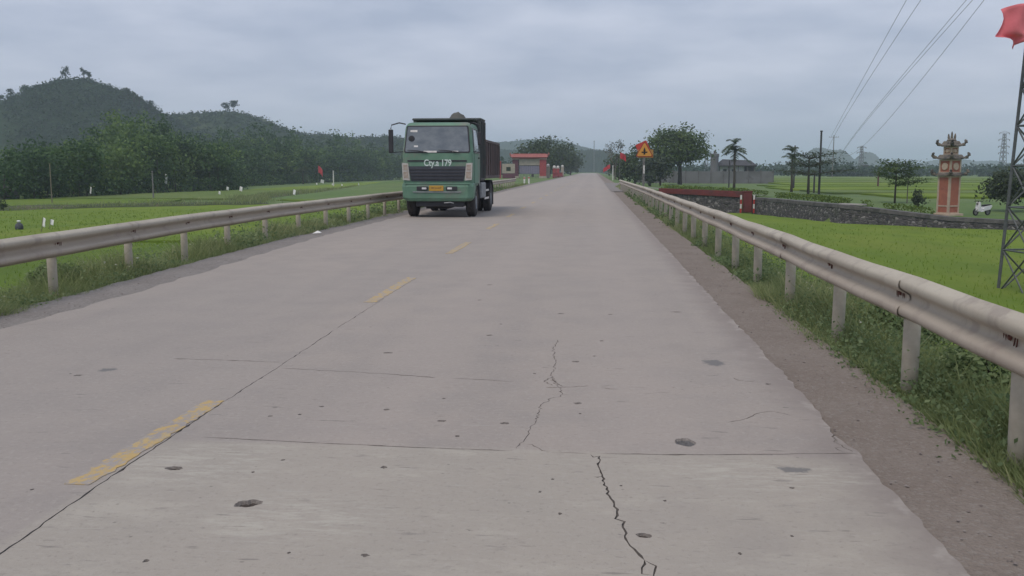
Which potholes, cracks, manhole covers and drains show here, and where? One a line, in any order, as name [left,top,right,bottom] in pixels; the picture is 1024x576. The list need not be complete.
crack [516,340,578,452]
crack [591,455,657,576]
pothole [234,499,263,507]
pothole [675,438,696,447]
